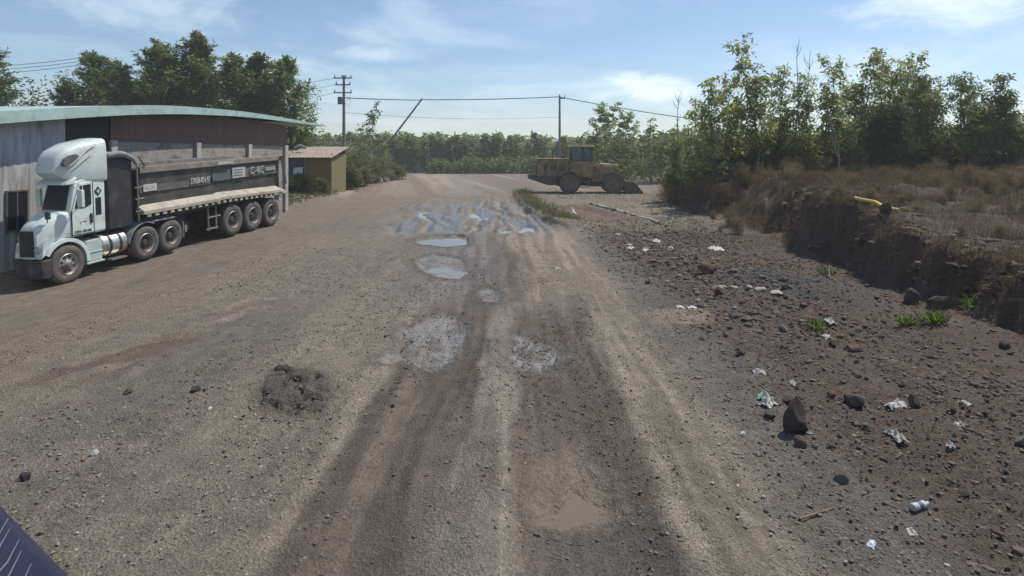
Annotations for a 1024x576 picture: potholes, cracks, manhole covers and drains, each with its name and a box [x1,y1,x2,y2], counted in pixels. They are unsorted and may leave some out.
pothole [491,329,578,379]
pothole [470,283,514,305]
pothole [411,253,478,280]
pothole [507,445,639,546]
pothole [405,234,474,247]
pothole [369,312,480,377]
